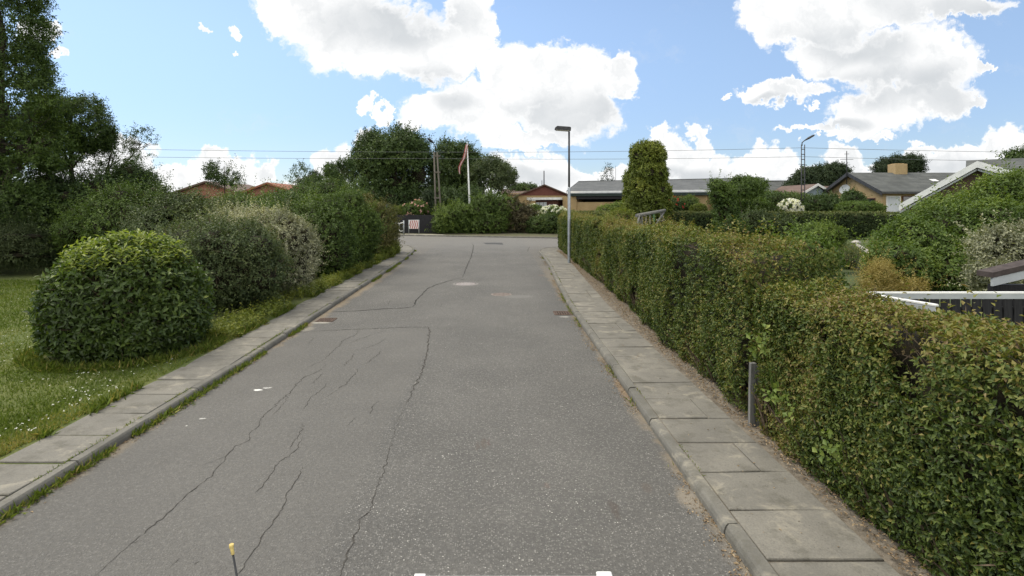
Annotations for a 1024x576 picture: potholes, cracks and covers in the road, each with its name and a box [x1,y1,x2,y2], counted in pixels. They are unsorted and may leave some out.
crack [97,331,380,574]
